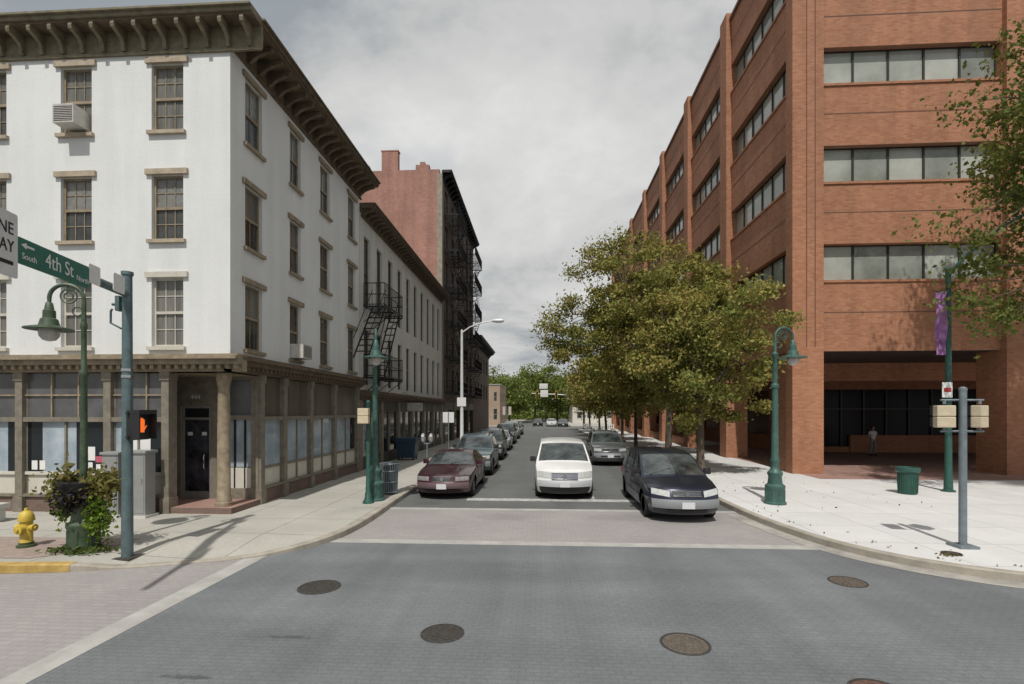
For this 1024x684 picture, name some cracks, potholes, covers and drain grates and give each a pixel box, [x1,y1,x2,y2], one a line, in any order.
manhole cover [420,624,464,644]
manhole cover [660,632,712,656]
manhole cover [297,580,341,595]
manhole cover [827,576,869,588]
